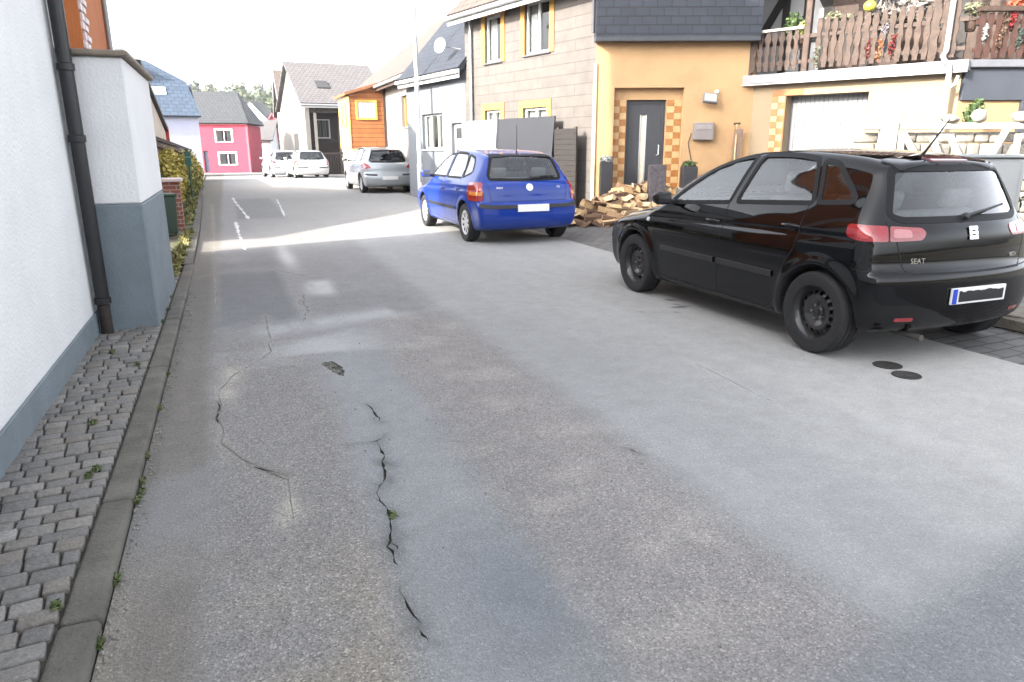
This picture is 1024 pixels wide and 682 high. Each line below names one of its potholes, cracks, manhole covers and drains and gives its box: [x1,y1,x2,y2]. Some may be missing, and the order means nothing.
crack [213,316,294,519]
crack [366,404,398,565]
crack [399,589,428,640]
manhole cover [872,361,903,370]
crack [298,296,310,322]
pothole [322,361,345,376]
manhole cover [891,371,922,380]
